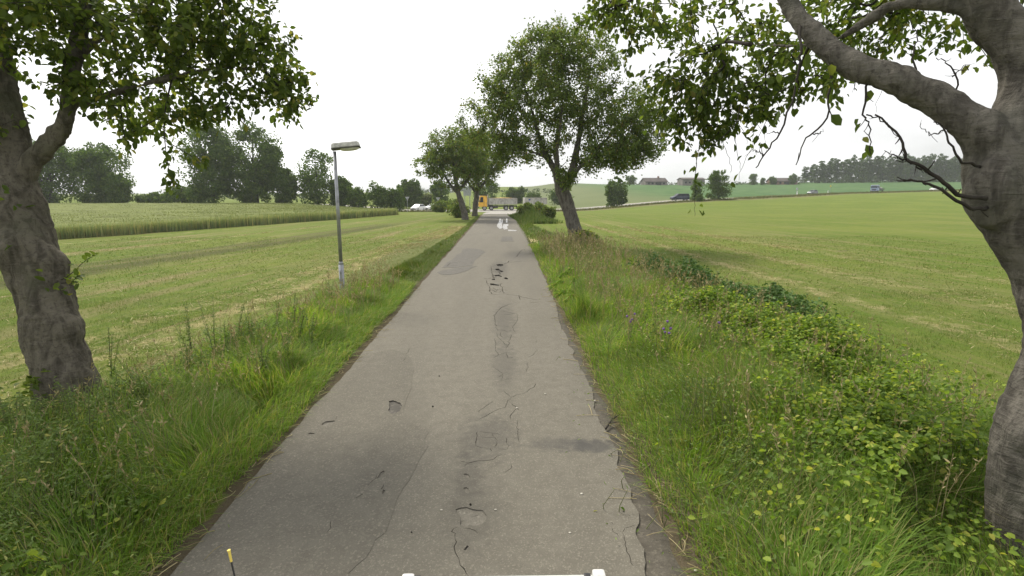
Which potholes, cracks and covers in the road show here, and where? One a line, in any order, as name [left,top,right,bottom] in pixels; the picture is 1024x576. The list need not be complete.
pothole [388,400,402,414]
crack [467,250,536,473]
pothole [456,507,487,528]
